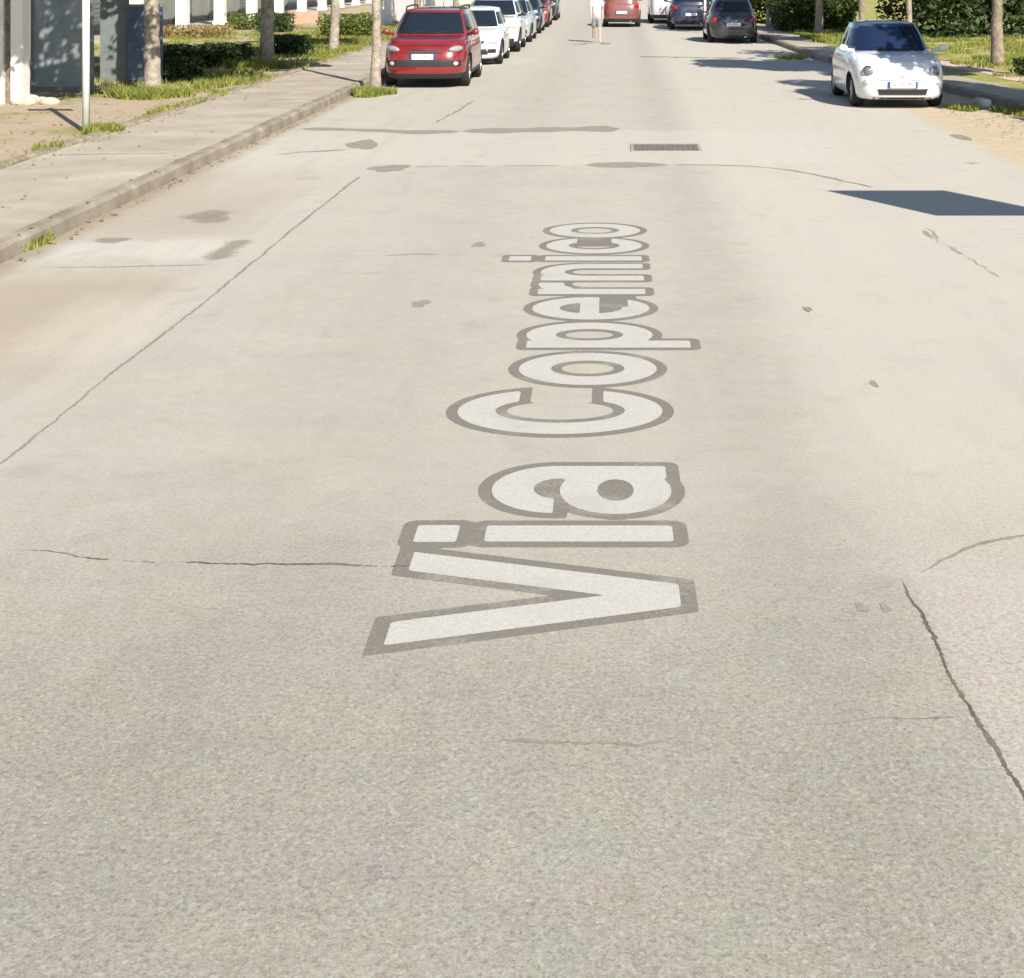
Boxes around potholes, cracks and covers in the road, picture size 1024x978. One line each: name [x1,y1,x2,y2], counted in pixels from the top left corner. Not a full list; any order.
crack [505,738,674,747]
crack [929,229,998,276]
crack [21,550,410,567]
crack [792,535,1024,800]
